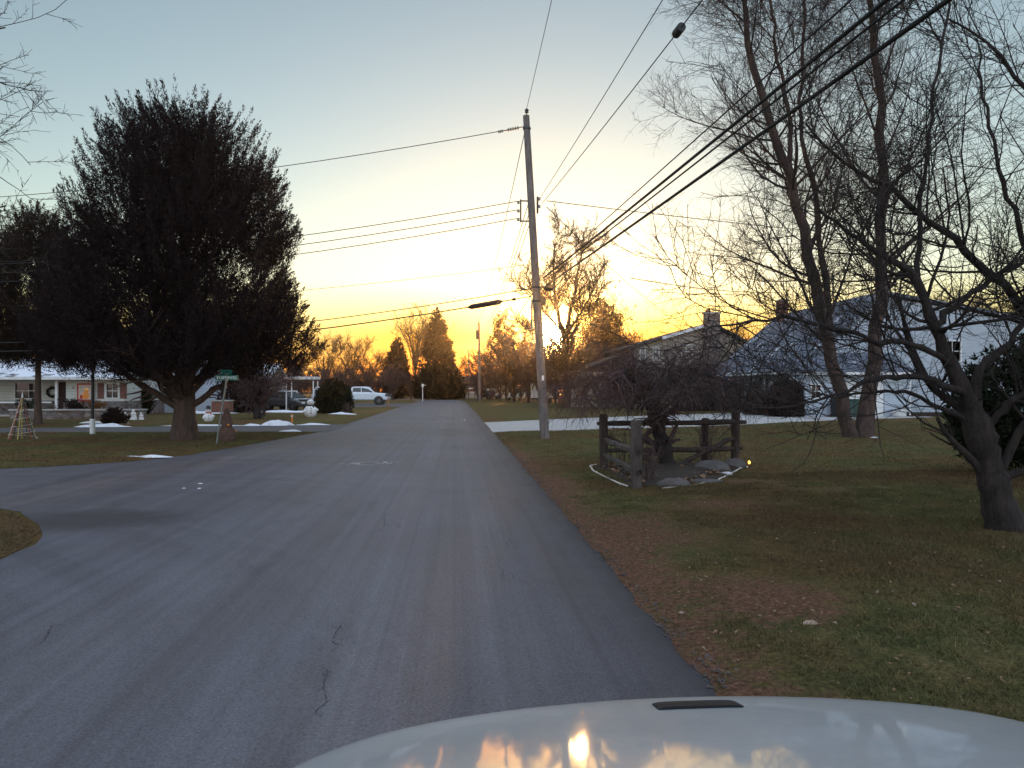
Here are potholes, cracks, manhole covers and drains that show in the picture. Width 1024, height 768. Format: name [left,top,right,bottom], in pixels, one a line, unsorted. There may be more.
crack [315,622,343,716]
